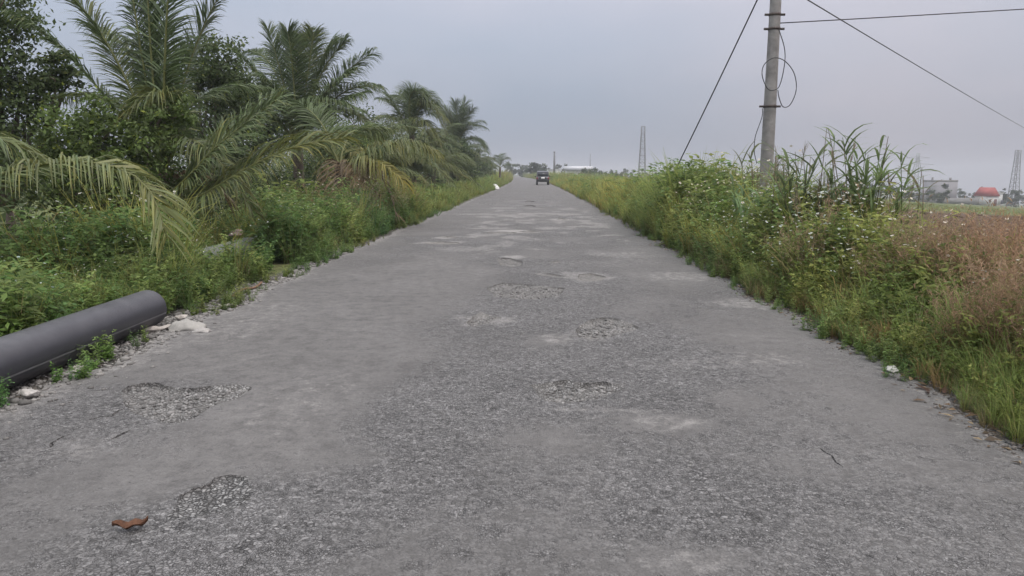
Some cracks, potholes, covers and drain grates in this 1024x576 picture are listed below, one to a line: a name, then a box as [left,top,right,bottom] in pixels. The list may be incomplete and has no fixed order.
pothole [467,312,501,327]
pothole [165,474,254,520]
pothole [496,258,523,267]
pothole [575,273,607,282]
pothole [120,382,252,423]
pothole [487,283,566,299]
pothole [529,379,625,403]
pothole [576,317,639,339]
